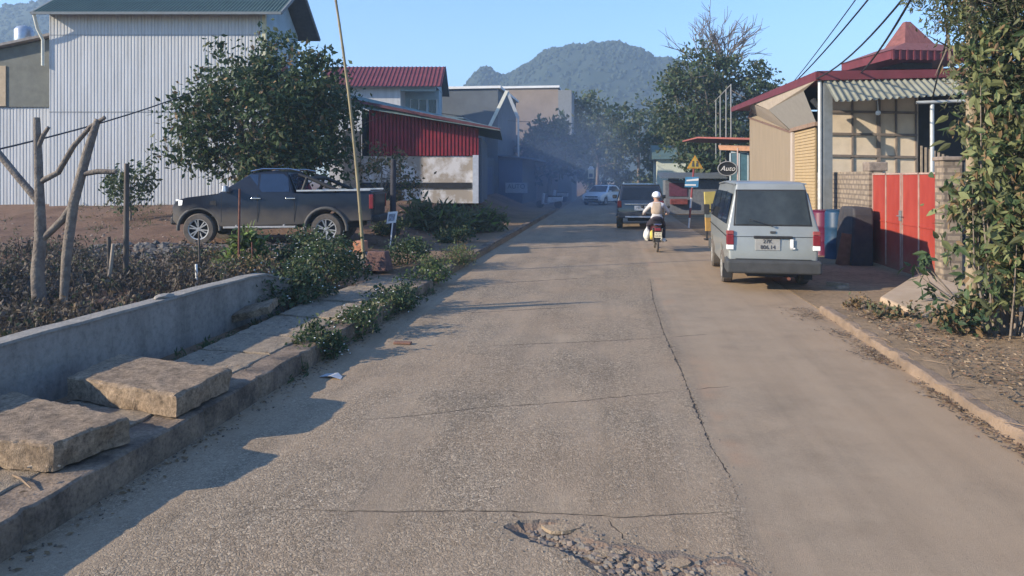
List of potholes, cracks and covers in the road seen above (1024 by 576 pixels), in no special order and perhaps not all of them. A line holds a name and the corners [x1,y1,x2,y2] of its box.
pothole [492,514,771,576]
crack [254,282,750,539]
